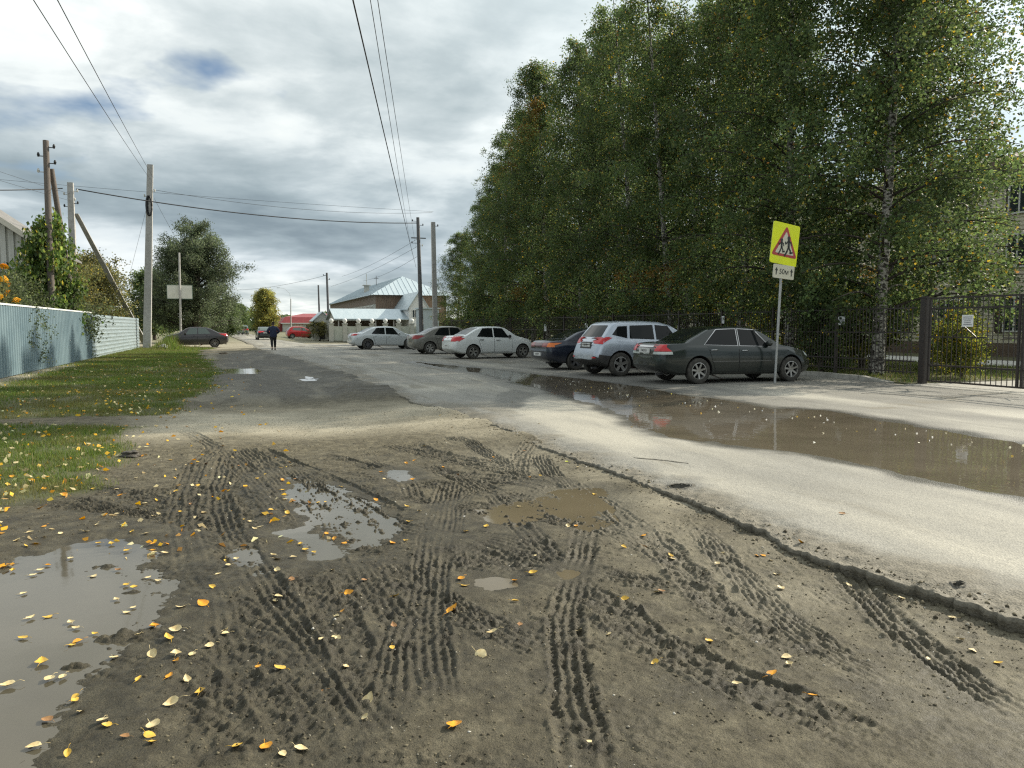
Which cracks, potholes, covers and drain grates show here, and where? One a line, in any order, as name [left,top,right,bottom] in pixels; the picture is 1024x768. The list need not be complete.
pothole [949,580,967,589]
